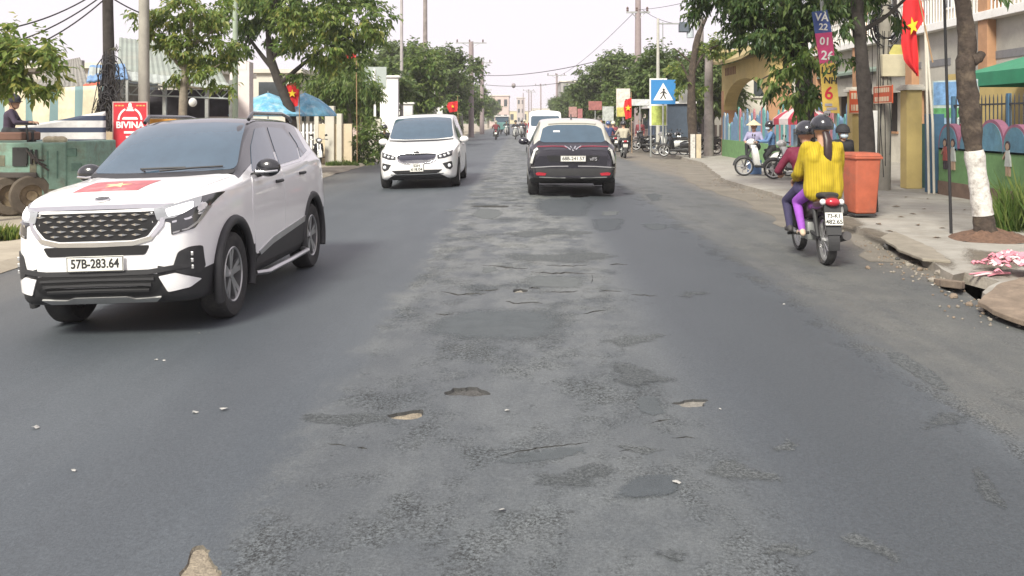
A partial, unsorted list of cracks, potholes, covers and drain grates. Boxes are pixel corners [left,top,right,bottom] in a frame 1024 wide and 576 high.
pothole [672,399,708,407]
pothole [179,545,222,576]
crack [497,442,587,457]
pothole [388,410,424,420]
crack [446,263,654,304]
pothole [444,387,491,397]
